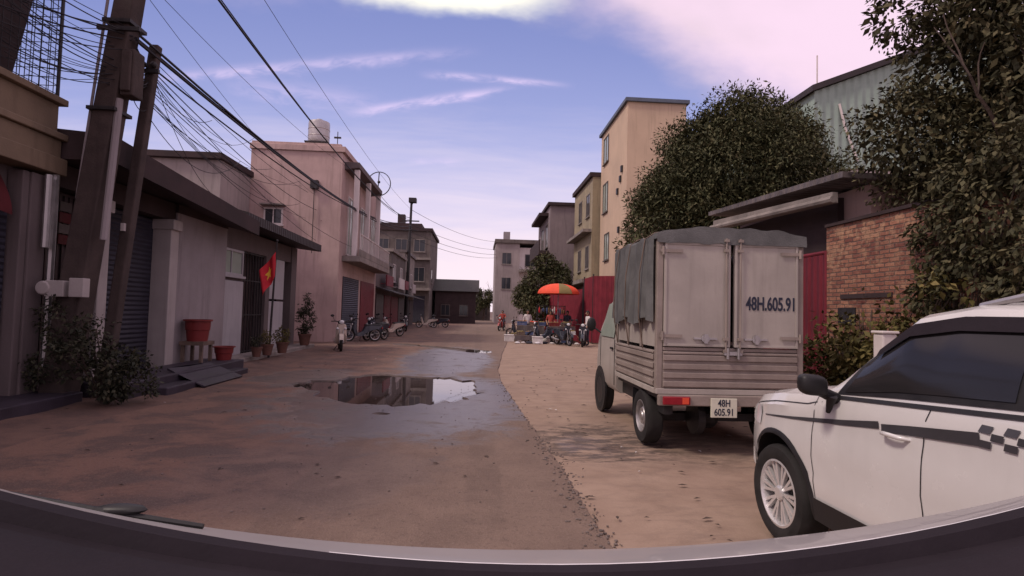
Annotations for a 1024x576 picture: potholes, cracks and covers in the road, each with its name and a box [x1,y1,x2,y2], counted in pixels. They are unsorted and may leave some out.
pothole [286,374,484,400]
pothole [395,343,492,353]
